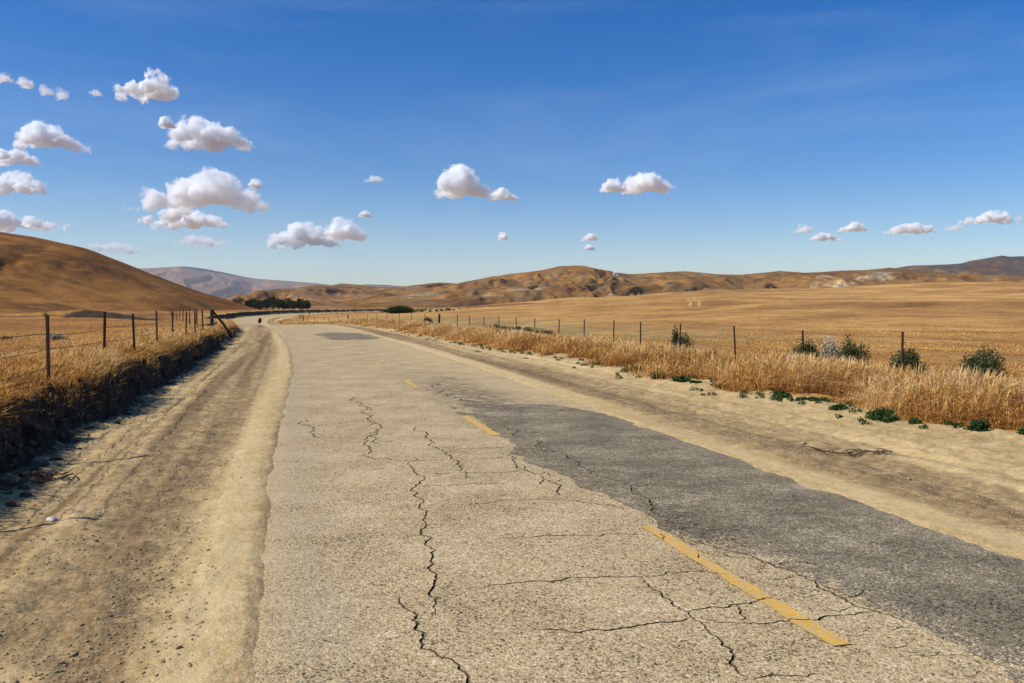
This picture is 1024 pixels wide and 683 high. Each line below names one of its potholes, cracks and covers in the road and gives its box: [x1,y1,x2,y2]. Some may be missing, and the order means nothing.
crack [350,396,905,683]
